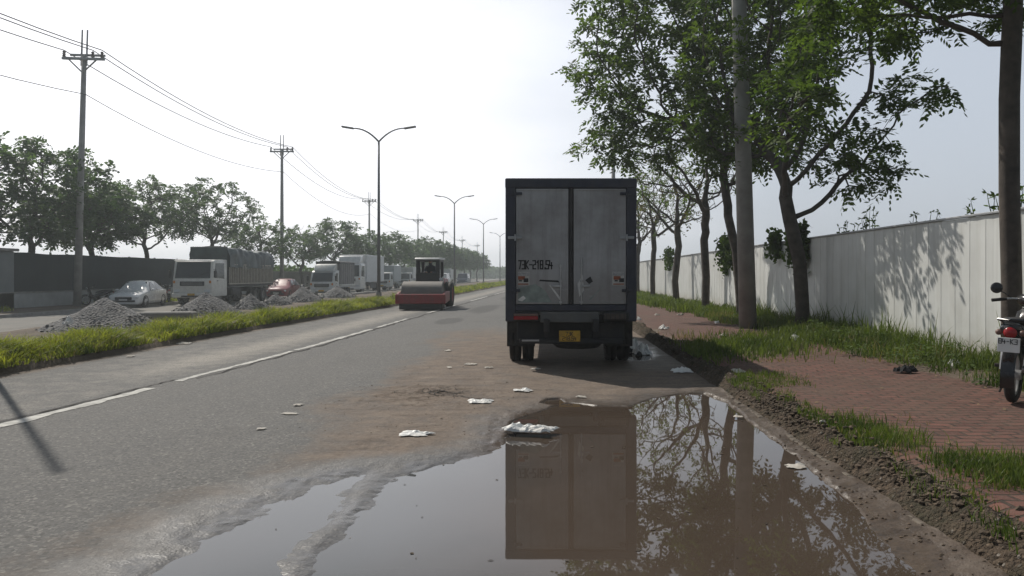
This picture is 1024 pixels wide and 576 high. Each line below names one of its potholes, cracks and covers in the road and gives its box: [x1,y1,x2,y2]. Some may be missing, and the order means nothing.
pothole [501,392,883,541]
